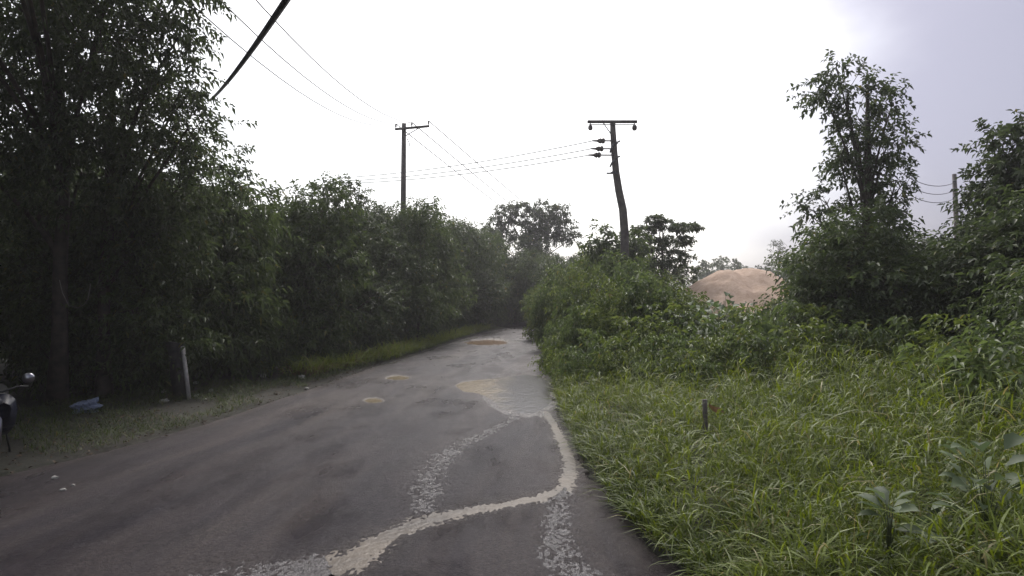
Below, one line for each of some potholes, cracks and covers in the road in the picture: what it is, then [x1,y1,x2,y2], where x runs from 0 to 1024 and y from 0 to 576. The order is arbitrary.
pothole [455,374,553,413]
